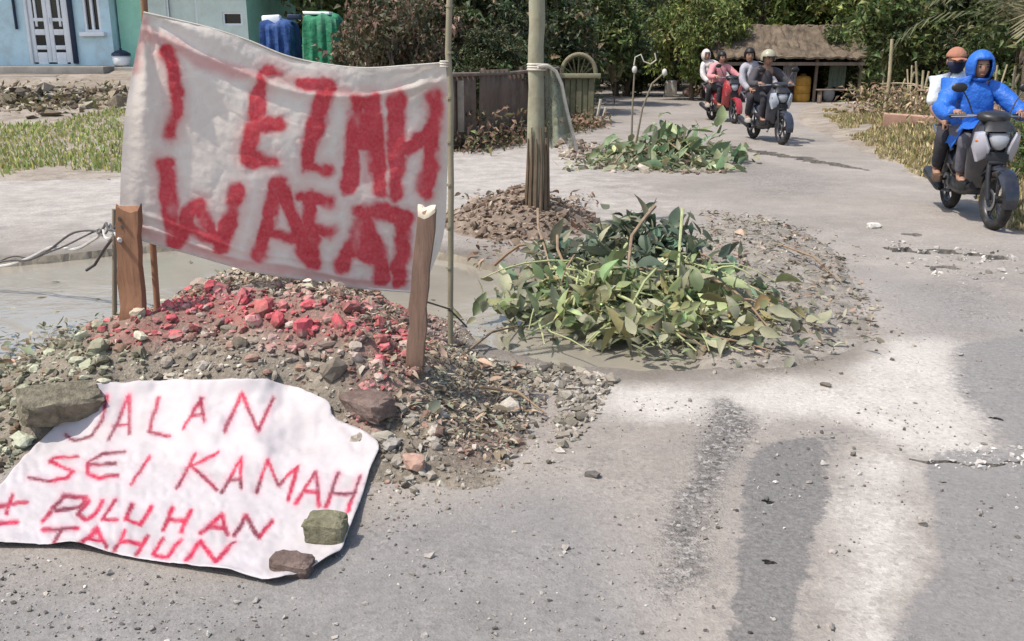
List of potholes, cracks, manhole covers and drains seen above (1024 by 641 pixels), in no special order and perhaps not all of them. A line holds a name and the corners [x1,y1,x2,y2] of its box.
crack [882,247,1010,260]
crack [706,142,870,171]
